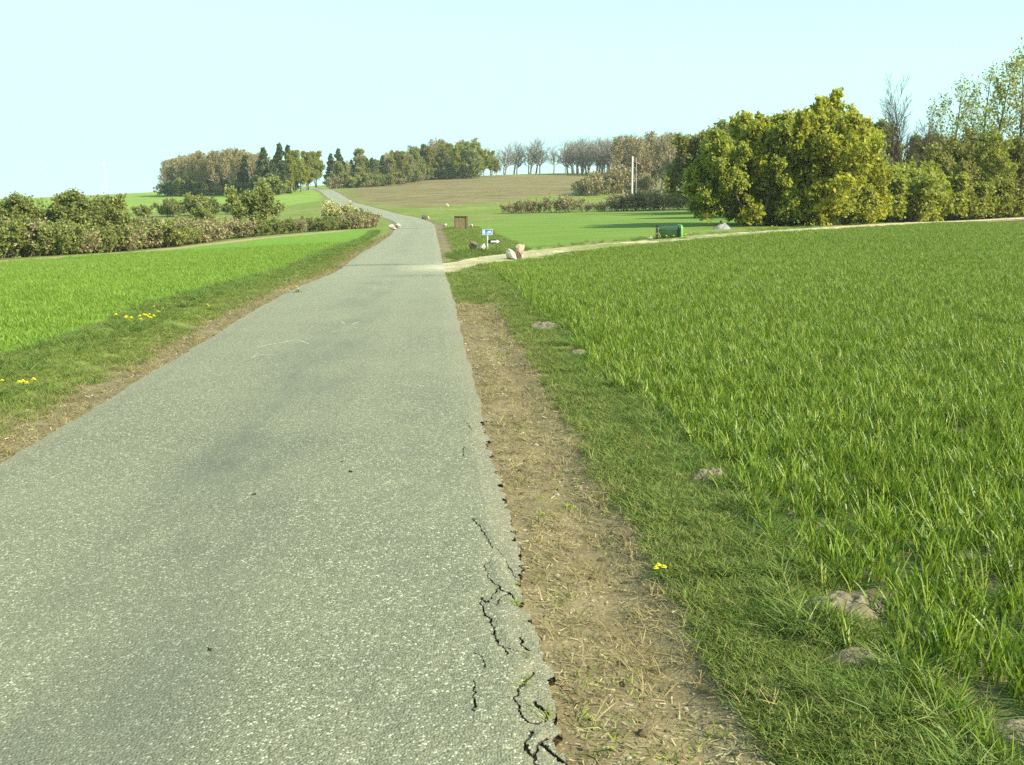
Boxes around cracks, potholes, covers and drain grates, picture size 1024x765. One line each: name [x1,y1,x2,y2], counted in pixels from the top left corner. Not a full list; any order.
crack [471,518,566,765]
